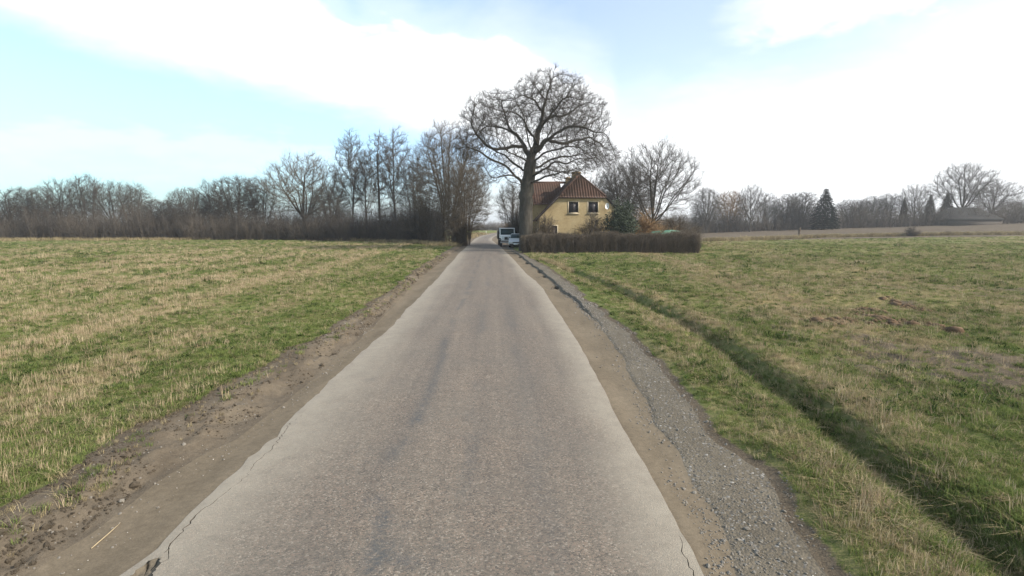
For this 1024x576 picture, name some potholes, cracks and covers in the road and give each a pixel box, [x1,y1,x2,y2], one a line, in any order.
crack [161,418,297,563]
